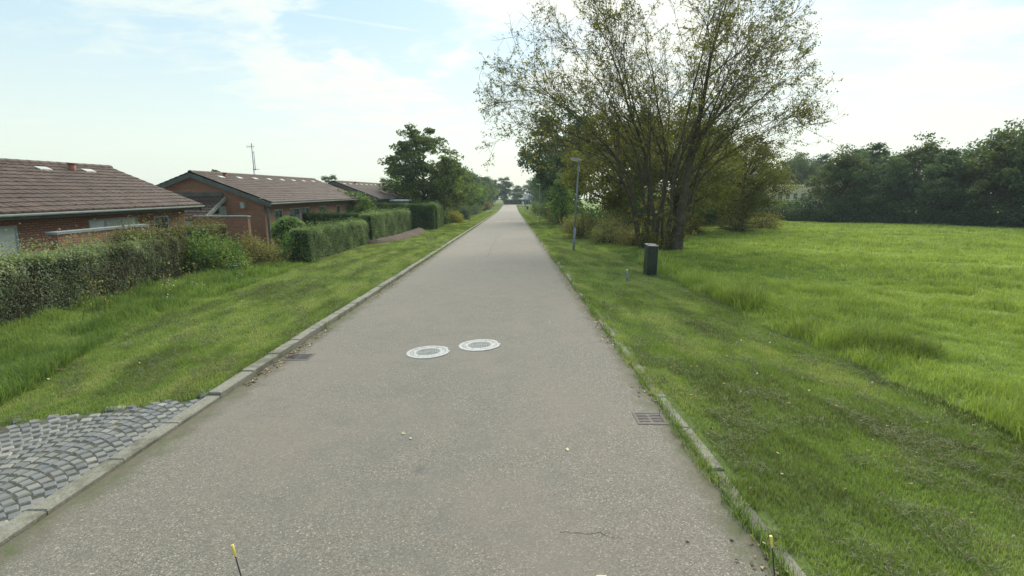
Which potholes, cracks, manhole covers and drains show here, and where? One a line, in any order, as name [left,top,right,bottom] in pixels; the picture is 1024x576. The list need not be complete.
manhole cover [458,339,501,351]
drain grate [281,353,316,361]
drain grate [632,412,669,425]
manhole cover [406,346,450,359]
